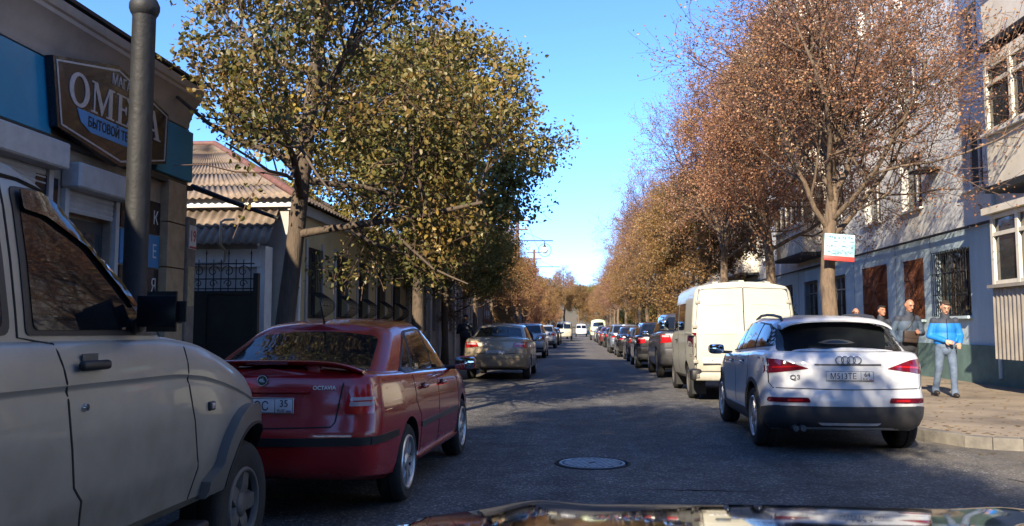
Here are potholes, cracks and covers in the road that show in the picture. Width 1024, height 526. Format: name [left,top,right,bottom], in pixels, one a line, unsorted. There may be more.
manhole cover [554,457,631,470]
